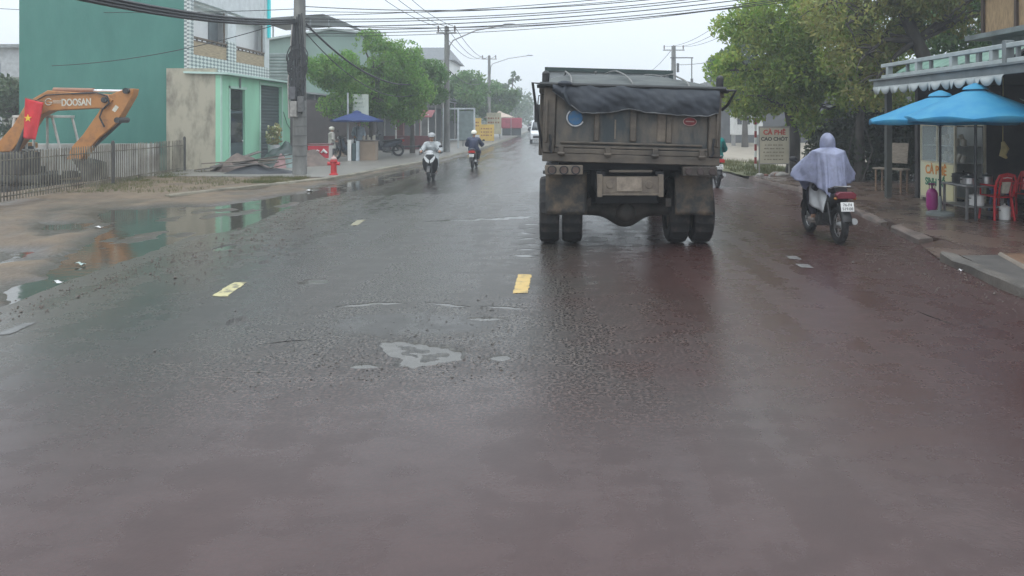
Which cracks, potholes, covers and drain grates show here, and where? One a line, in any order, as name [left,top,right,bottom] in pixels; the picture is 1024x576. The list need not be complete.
pothole [376,337,468,369]
pothole [489,354,512,362]
